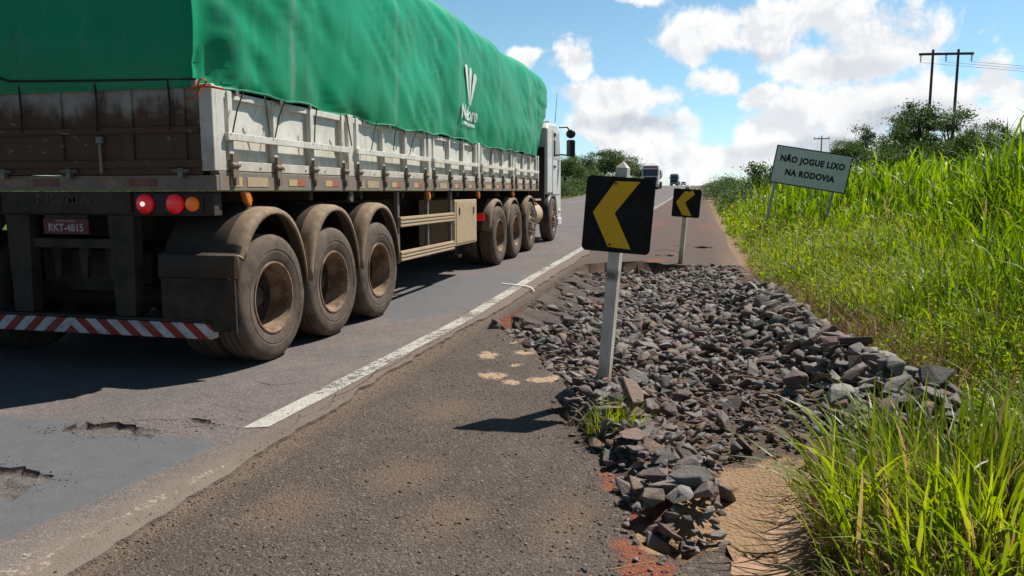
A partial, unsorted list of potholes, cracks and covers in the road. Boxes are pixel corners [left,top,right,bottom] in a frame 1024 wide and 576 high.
pothole [185,418,219,428]
pothole [0,466,54,503]
pothole [44,421,160,438]
